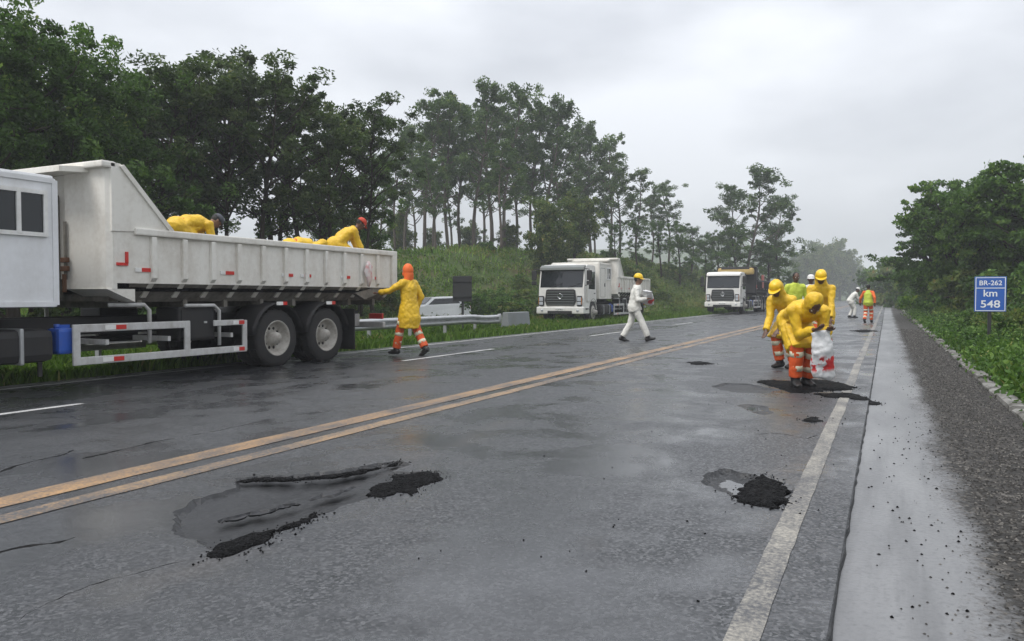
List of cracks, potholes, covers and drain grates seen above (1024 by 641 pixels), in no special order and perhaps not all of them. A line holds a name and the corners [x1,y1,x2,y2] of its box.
crack [0,422,255,472]
crack [0,537,75,553]
pothole [171,461,443,558]
pothole [701,468,793,509]
